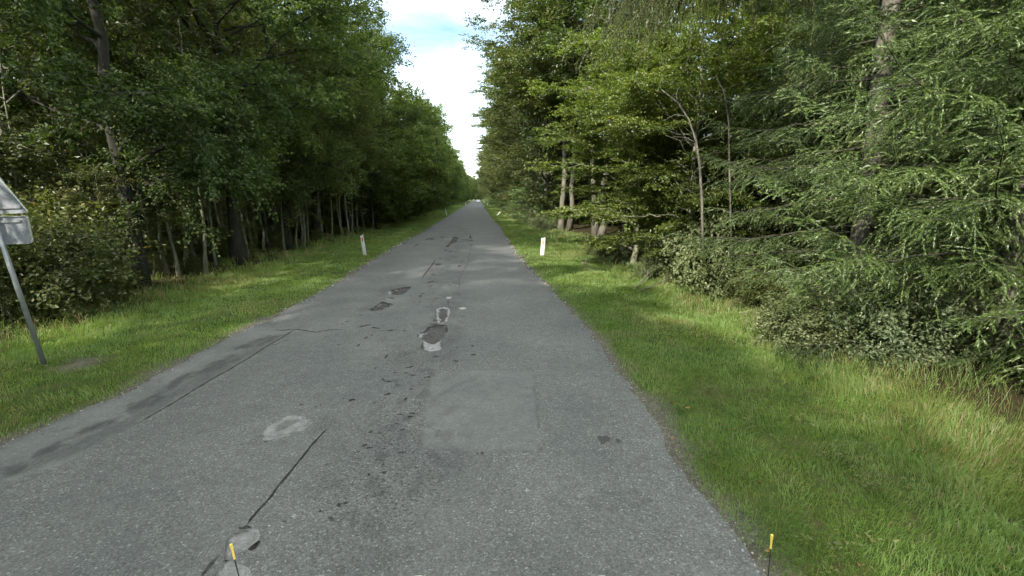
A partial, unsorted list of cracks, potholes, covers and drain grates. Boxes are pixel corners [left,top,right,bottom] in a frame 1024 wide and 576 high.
pothole [435,307,451,323]
pothole [368,302,393,311]
pothole [388,287,411,295]
crack [247,429,328,525]
pothole [417,325,448,351]
